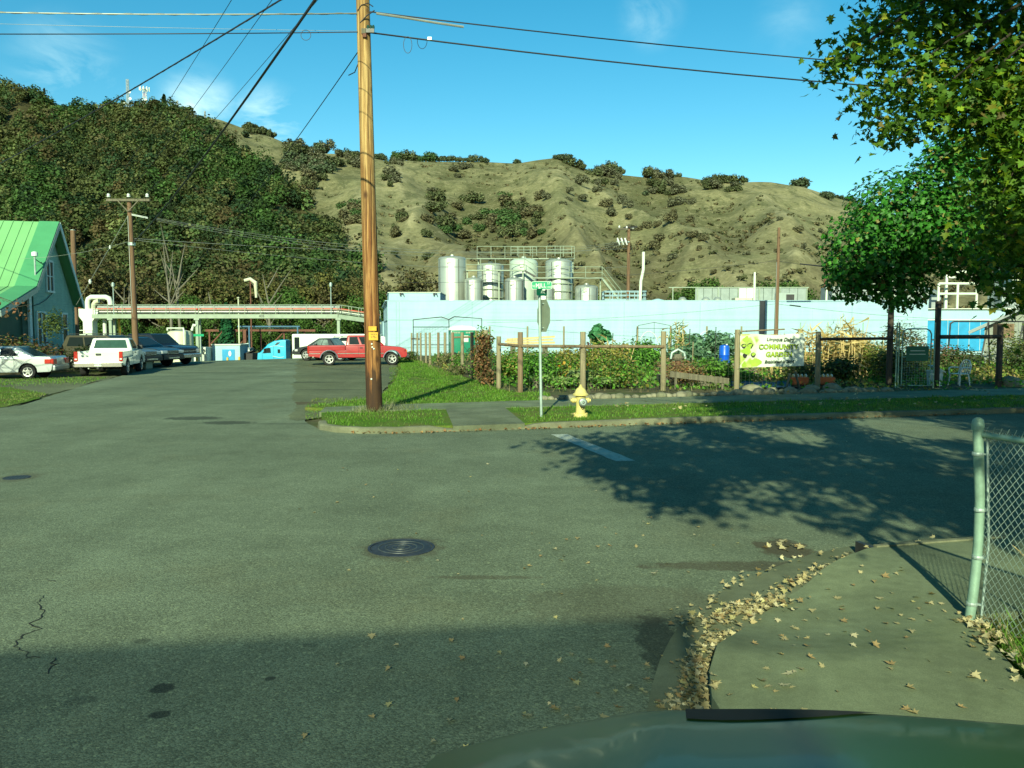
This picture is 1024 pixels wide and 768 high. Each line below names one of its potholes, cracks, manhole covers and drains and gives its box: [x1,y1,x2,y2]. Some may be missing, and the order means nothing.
manhole cover [367,539,435,557]
crack [13,580,58,673]
